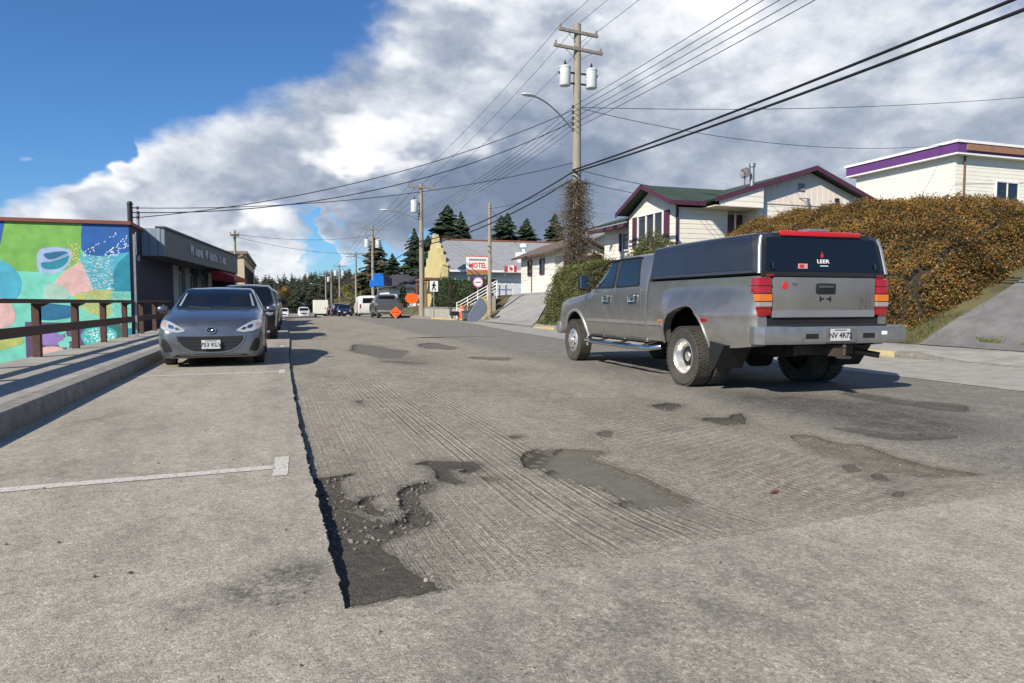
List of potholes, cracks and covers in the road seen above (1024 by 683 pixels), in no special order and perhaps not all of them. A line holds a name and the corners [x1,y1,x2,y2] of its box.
pothole [790,435,977,478]
pothole [415,461,481,484]
pothole [651,403,682,411]
pothole [351,344,408,359]
pothole [702,413,747,425]
pothole [314,472,437,608]
pothole [520,448,689,508]
